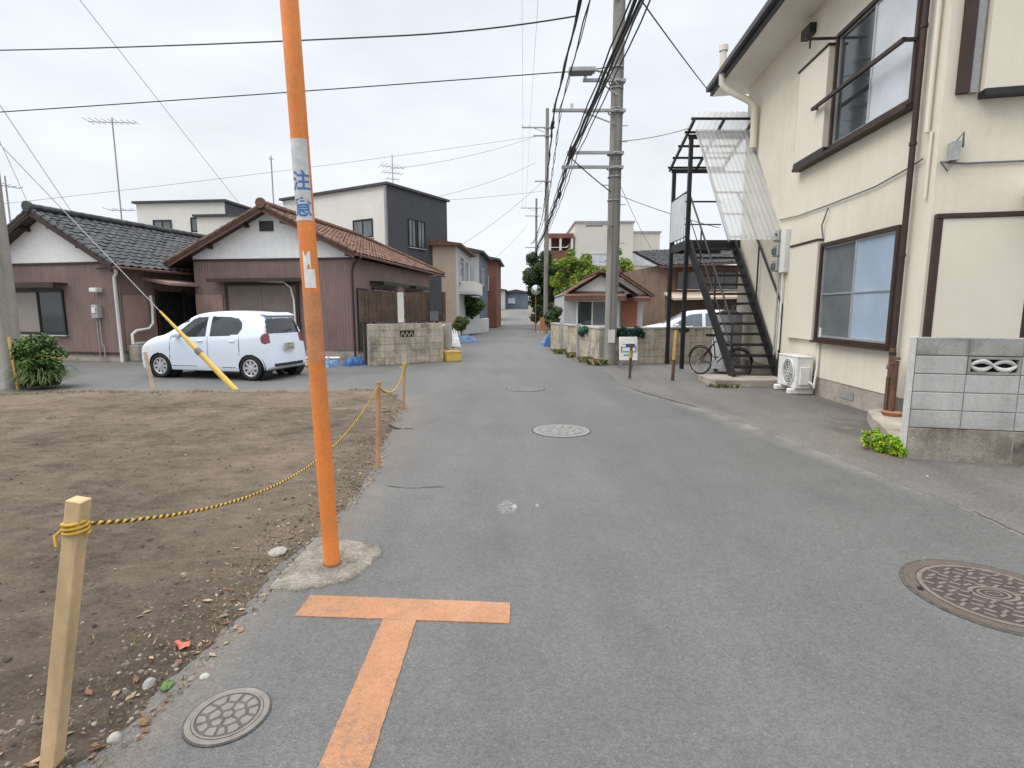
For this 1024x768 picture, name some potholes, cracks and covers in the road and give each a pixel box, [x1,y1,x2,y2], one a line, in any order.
manhole cover [181,687,272,748]
manhole cover [899,559,1024,636]
manhole cover [532,424,591,438]
